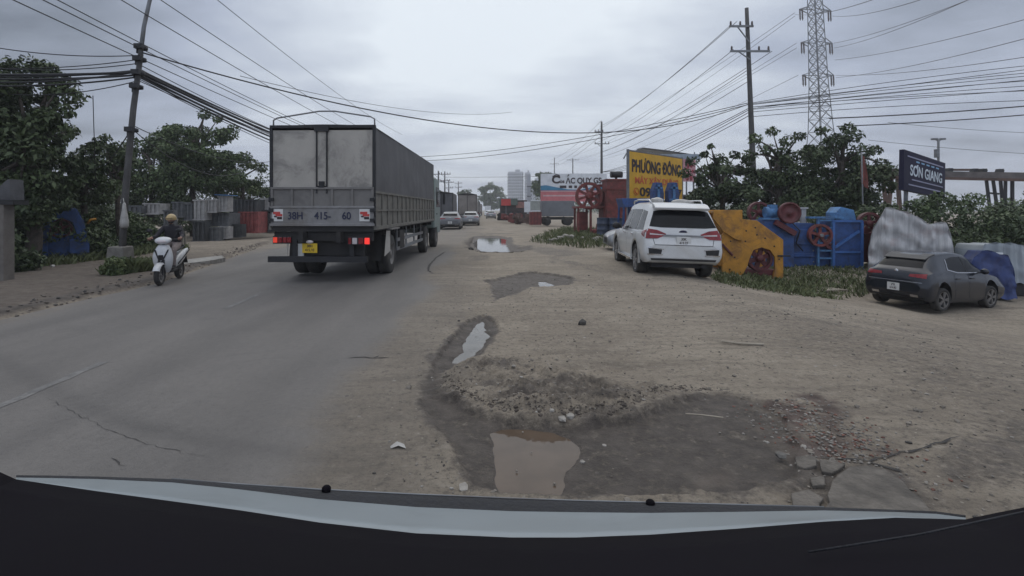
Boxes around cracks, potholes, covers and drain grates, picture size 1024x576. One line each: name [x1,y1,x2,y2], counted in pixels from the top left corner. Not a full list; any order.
crack [48,398,206,457]
pothole [463,235,534,253]
pothole [408,386,815,503]
crack [811,436,958,472]
pothole [480,271,579,303]
pothole [422,313,507,379]
